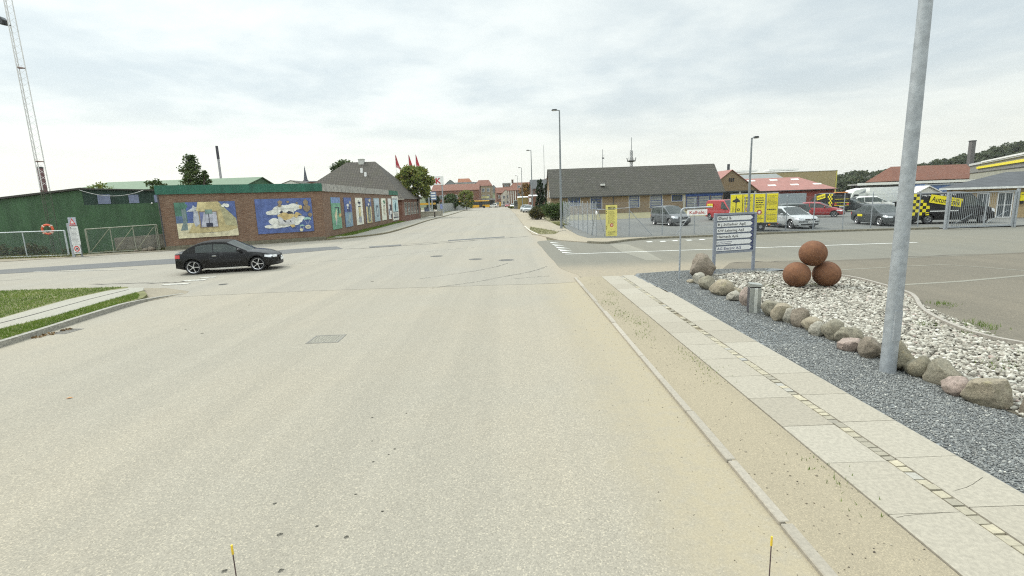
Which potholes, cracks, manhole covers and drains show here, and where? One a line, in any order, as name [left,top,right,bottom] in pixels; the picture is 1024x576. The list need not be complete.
manhole cover [305,334,347,344]
